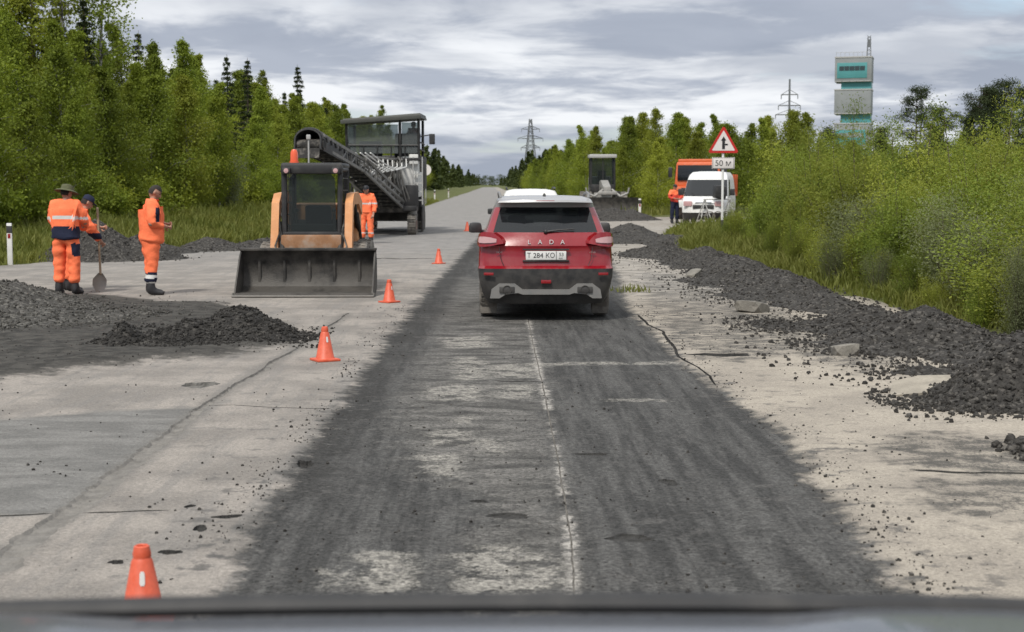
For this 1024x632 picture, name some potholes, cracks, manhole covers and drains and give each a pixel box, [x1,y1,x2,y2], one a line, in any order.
crack [638,315,716,385]
pothole [604,533,655,542]
